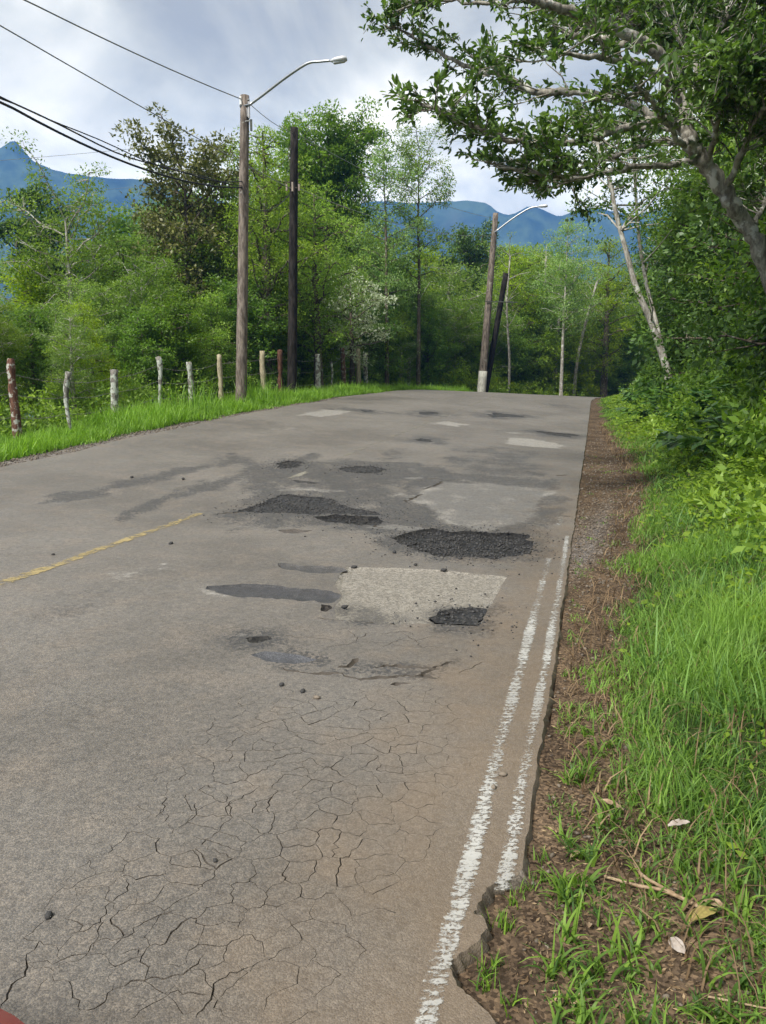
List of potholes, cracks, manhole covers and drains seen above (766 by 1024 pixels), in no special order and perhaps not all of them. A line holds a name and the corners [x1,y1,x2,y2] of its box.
pothole [206,584,341,603]
pothole [278,563,347,574]
pothole [251,651,316,664]
crack [0,681,477,1024]
pothole [340,466,388,474]
